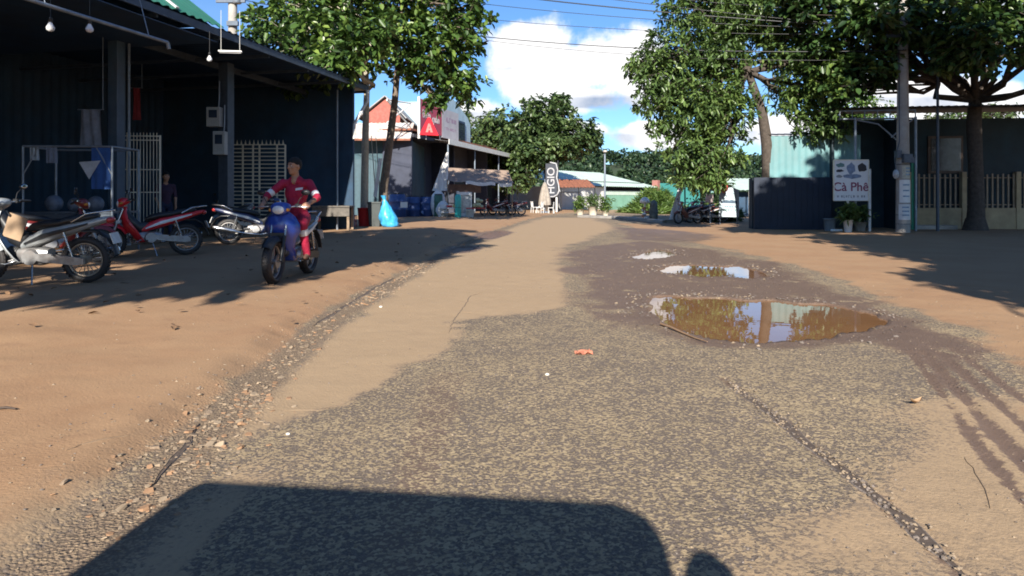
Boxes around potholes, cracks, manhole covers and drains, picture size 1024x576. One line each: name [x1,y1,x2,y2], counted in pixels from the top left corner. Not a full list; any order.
pothole [640,261,790,280]
pothole [612,290,916,353]
crack [724,377,990,576]
